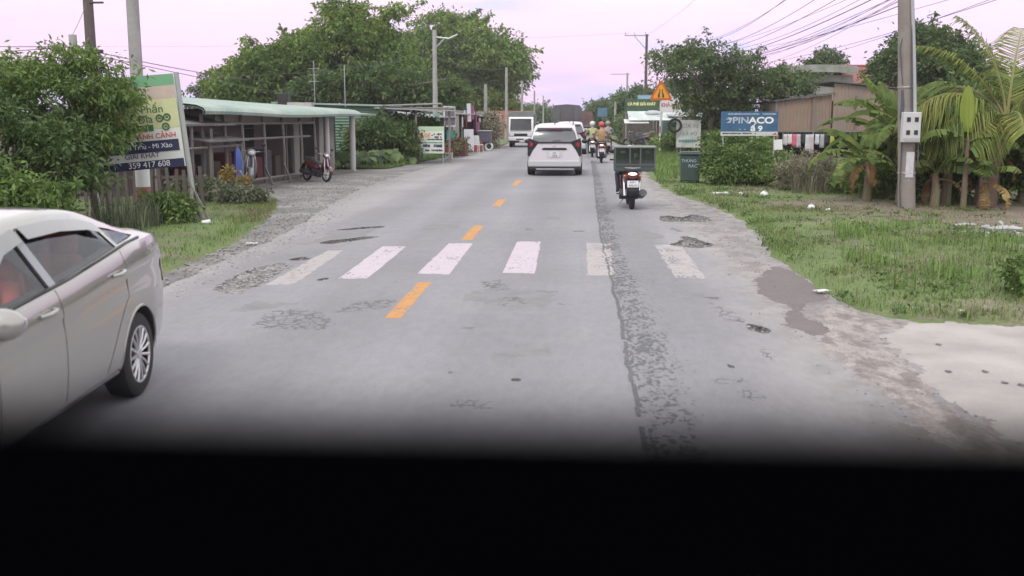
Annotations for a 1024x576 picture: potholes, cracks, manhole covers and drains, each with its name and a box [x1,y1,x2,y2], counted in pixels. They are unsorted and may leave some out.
crack [450,399,493,409]
pothole [746,324,771,334]
pothole [668,236,714,248]
pothole [212,263,293,294]
crack [252,299,396,330]
crack [711,378,767,400]
pothole [658,214,712,222]
pothole [319,236,380,244]
